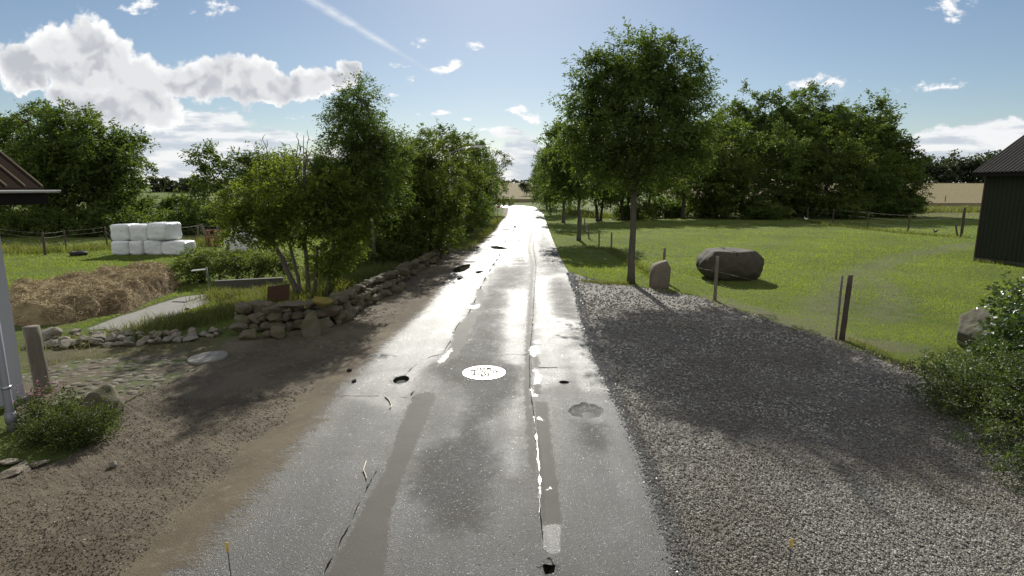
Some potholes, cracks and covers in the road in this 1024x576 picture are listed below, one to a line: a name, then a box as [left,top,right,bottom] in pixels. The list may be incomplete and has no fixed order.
pothole [536,554,562,576]
pothole [452,264,472,273]
pothole [389,375,412,385]
crack [318,467,383,576]
manhole cover [462,366,506,380]
crack [333,222,582,565]
pothole [565,401,608,420]
